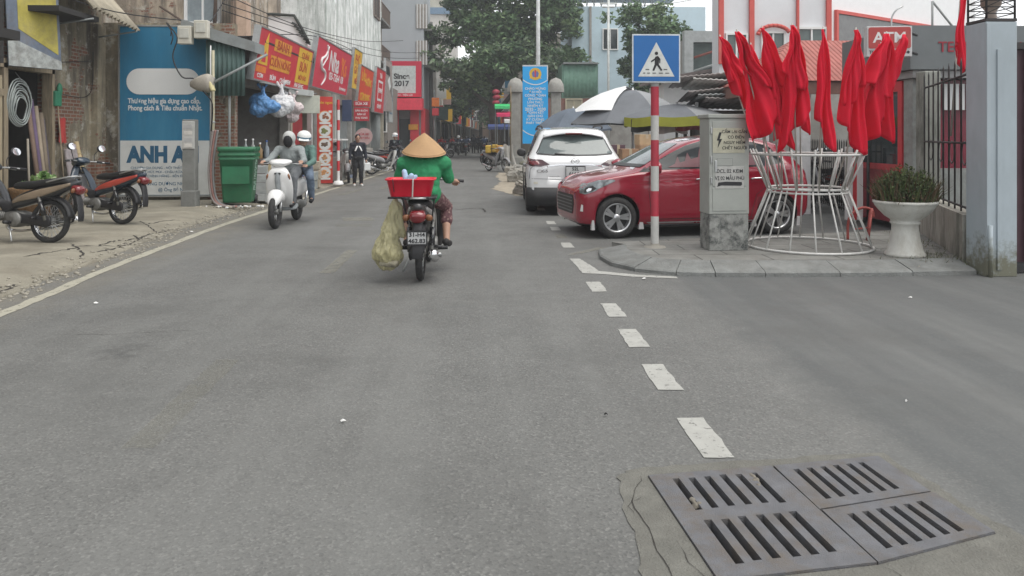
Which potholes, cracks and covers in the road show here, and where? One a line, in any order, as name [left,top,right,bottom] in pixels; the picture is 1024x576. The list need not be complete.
crack [23,220,171,259]
crack [628,479,703,575]
